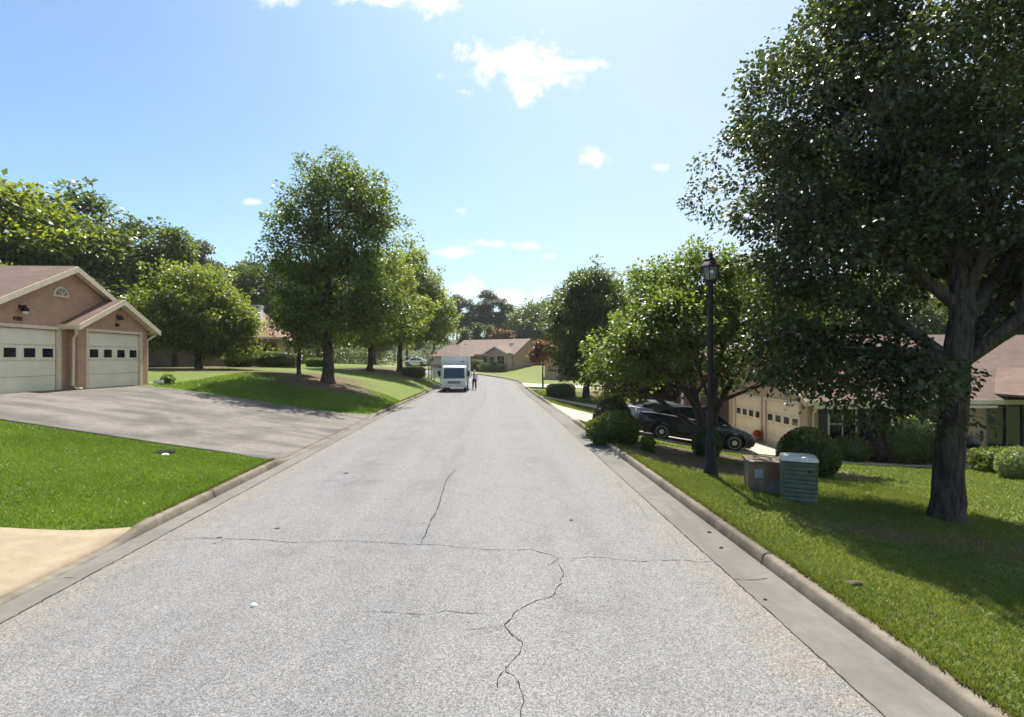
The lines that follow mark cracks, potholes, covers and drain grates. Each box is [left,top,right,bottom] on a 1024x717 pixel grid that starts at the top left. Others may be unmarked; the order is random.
crack [171,471,708,717]
